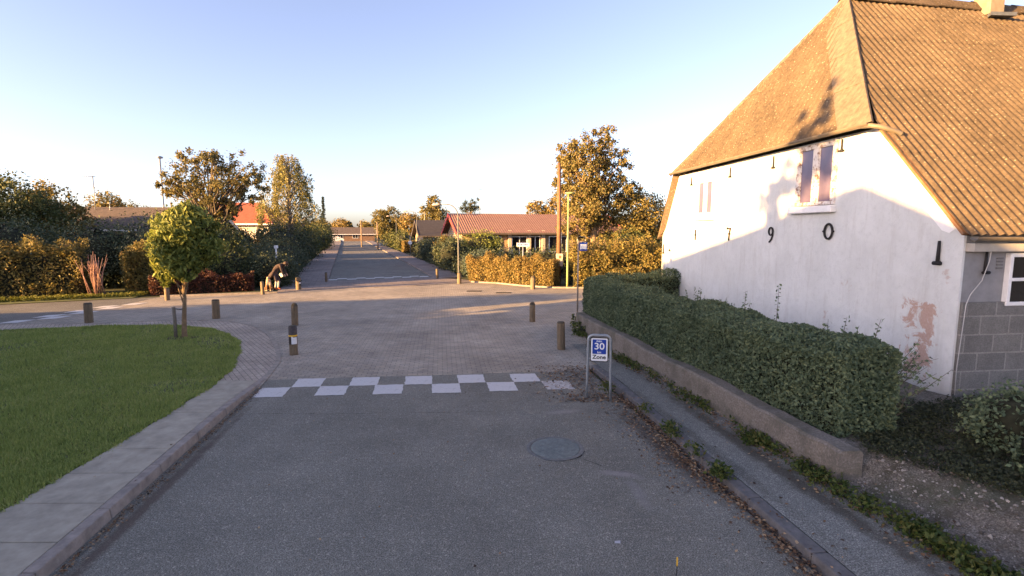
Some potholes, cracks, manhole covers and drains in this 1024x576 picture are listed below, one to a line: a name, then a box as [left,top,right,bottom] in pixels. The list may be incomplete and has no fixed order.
manhole cover [526,436,585,461]
